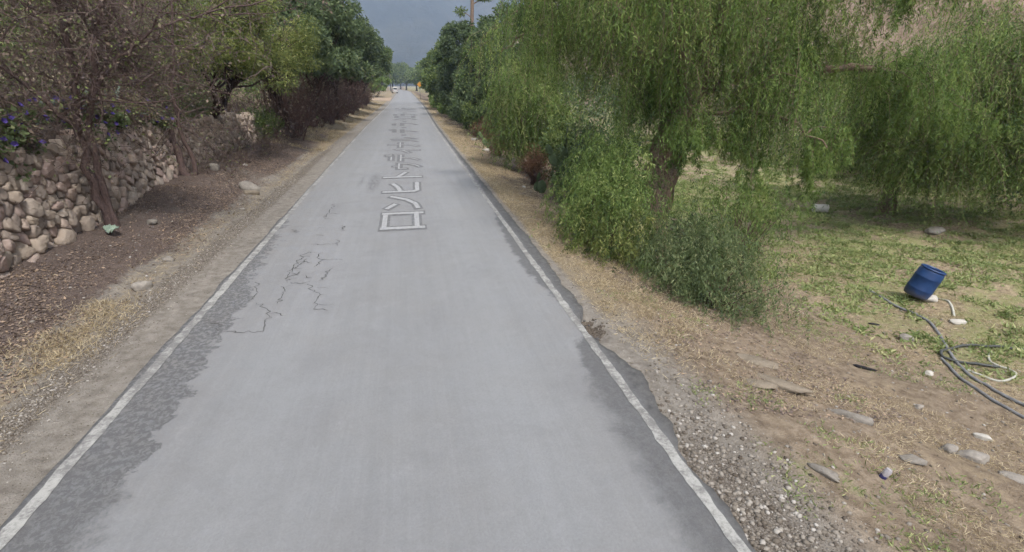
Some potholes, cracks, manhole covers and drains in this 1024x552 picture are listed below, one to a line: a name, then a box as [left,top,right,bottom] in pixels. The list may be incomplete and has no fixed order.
crack [210,204,345,333]
